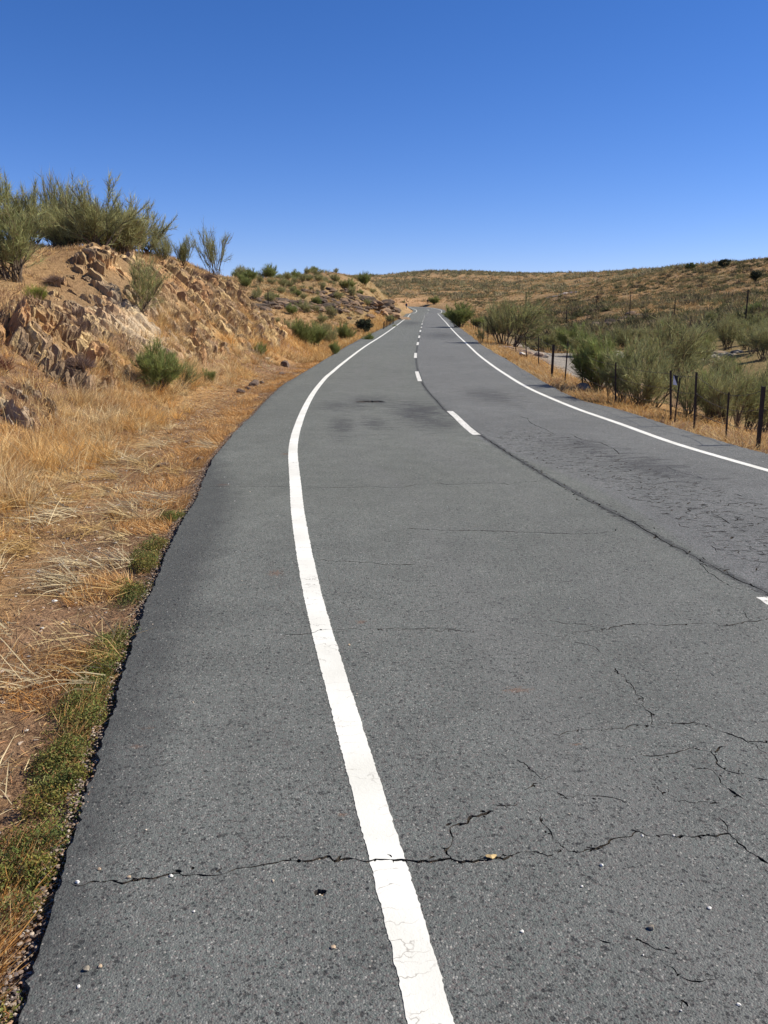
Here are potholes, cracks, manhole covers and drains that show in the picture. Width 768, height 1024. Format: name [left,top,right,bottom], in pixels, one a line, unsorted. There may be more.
crack [498,418,768,580]
crack [538,611,768,637]
crack [69,669,768,886]
crack [600,933,715,982]
